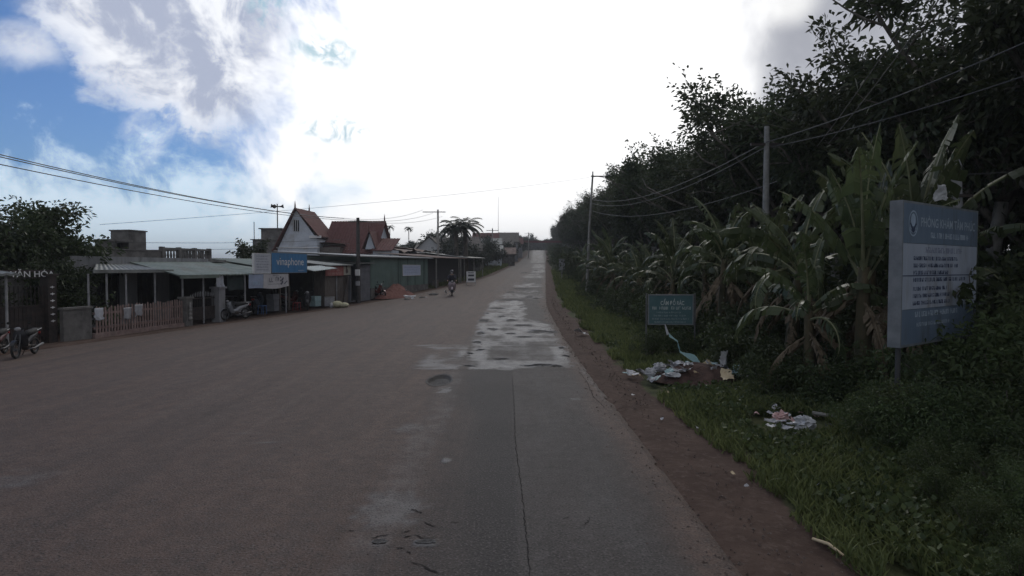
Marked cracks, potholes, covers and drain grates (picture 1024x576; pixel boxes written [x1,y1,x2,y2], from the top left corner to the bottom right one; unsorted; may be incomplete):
pothole [425,374,453,386]
